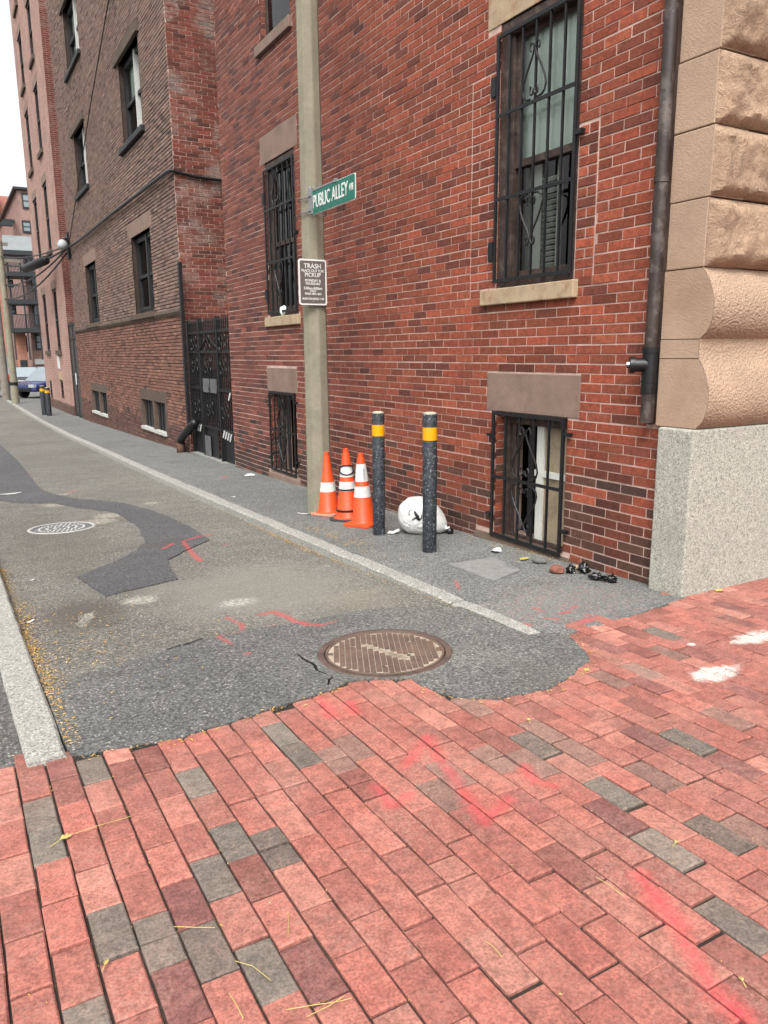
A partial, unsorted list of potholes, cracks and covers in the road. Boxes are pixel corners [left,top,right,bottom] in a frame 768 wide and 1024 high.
crack [298,654,332,686]
manhole cover [317,629,453,678]
utility cover [449,557,520,582]
manhole cover [27,522,96,534]
